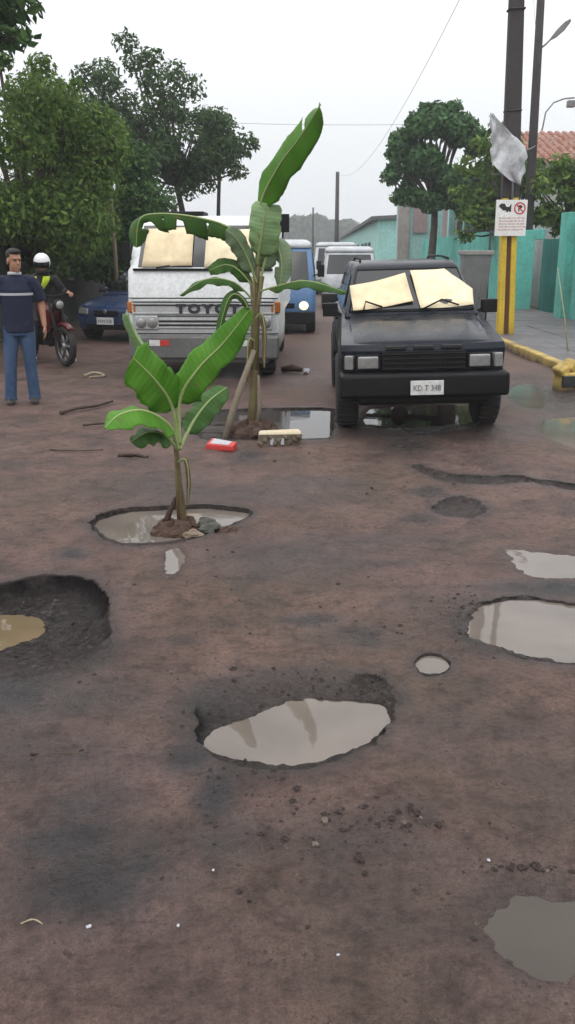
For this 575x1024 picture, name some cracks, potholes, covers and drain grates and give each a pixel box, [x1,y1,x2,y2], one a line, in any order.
pothole [430,495,488,518]
pothole [181,407,338,441]
pothole [193,670,398,770]
pothole [453,595,575,665]
pothole [414,653,451,677]
pothole [0,574,114,687]
pothole [88,504,253,546]
